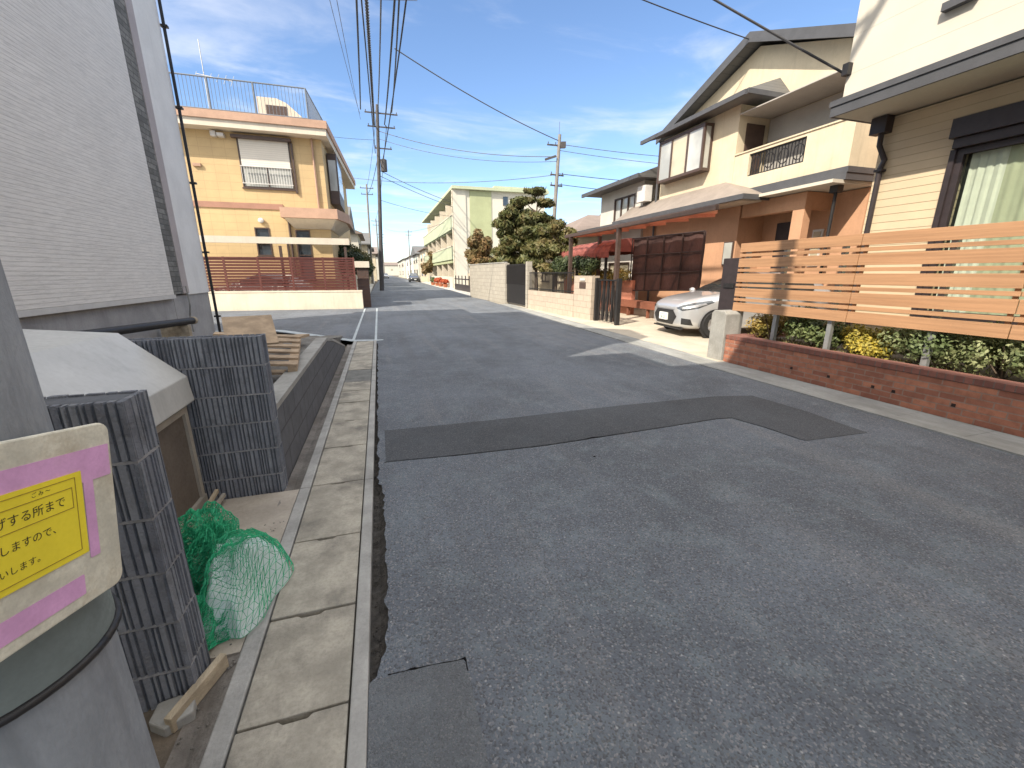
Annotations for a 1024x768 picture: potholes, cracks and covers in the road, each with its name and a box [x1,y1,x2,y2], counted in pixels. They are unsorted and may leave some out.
crack [370,344,389,682]
